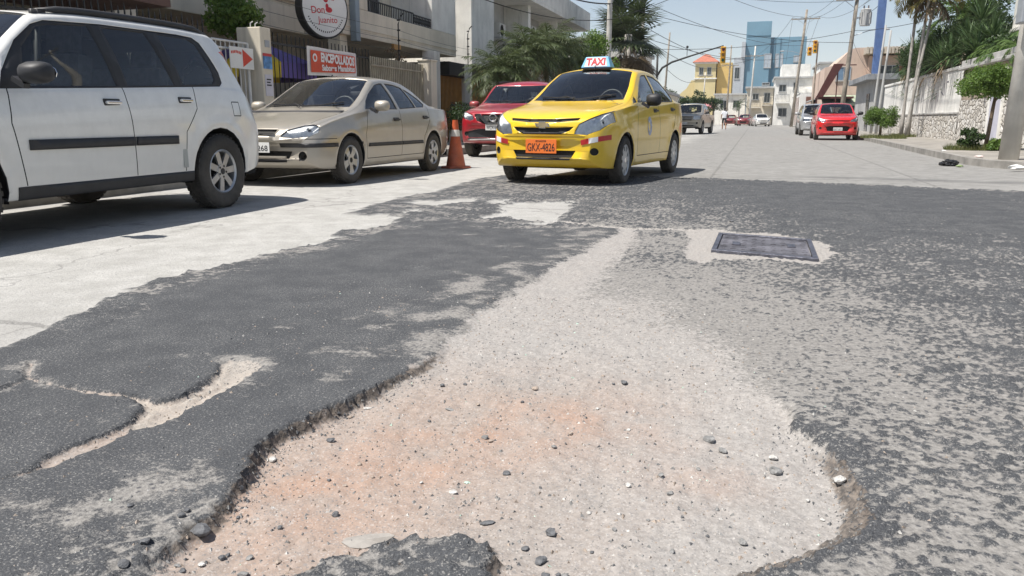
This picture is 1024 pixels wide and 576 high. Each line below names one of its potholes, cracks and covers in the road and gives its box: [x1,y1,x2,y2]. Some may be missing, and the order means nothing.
crack [0,359,123,397]
pothole [125,255,869,576]
manhole cover [711,232,819,262]
